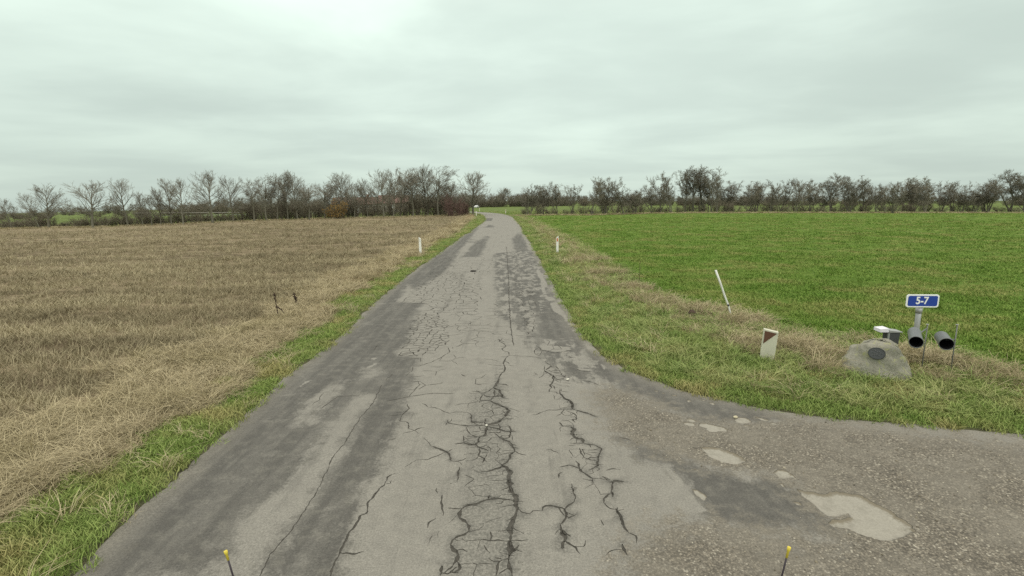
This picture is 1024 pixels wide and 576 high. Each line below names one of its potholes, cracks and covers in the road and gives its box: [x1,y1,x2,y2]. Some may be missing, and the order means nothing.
crack [330,258,637,576]
